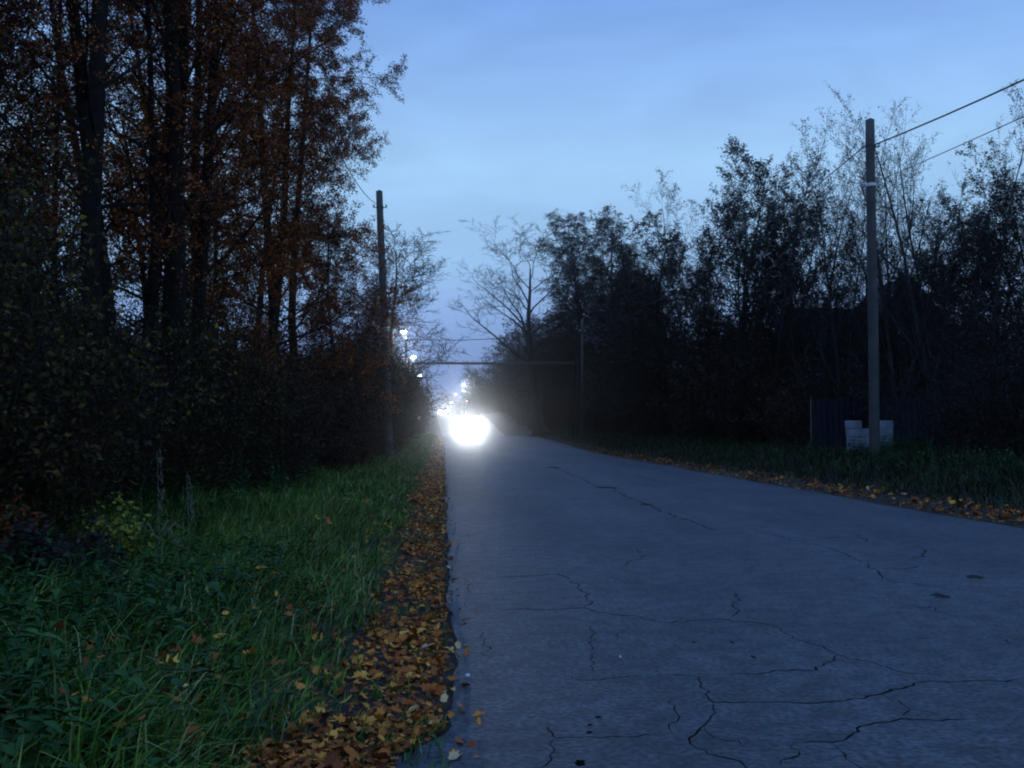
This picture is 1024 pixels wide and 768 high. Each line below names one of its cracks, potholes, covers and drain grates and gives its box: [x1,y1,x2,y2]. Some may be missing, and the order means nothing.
crack [514,574,1018,768]
